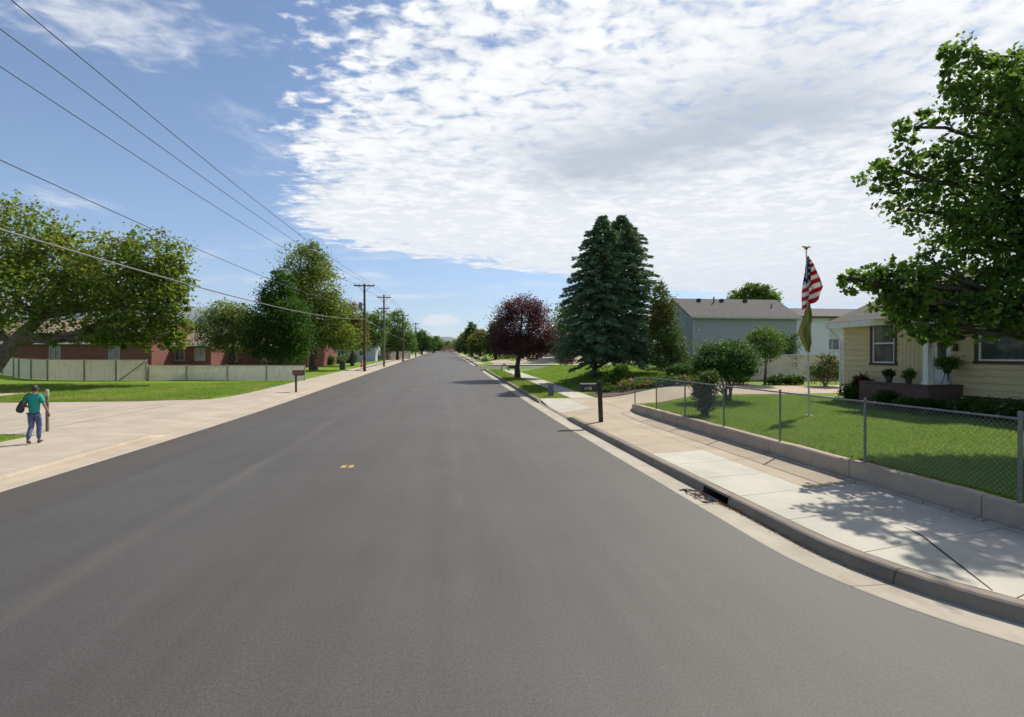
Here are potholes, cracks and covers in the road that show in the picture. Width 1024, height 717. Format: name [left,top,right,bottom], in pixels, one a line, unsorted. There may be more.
drain grate [704,483,736,504]
crack [905,527,992,590]
